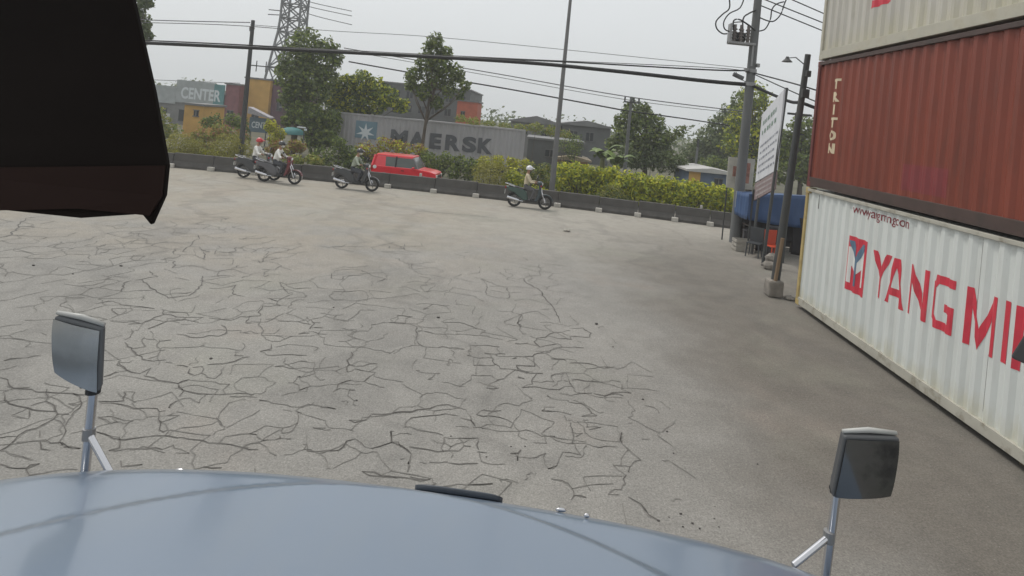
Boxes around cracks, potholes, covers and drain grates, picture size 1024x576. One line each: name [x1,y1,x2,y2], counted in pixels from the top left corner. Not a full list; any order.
crack [0,212,694,525]
